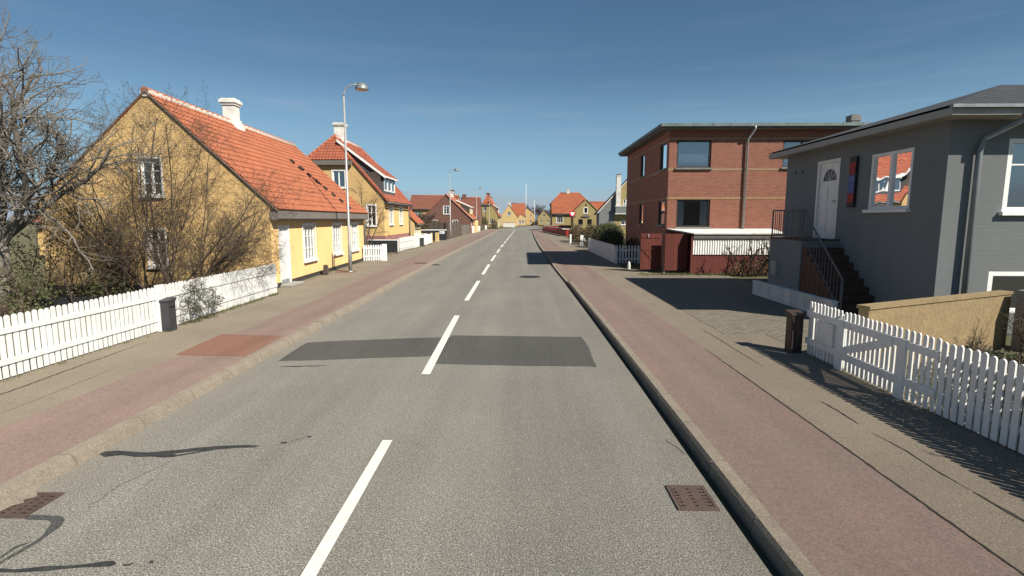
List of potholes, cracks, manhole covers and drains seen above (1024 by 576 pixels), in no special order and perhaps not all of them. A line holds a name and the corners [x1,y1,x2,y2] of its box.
drain grate [0,492,65,519]
crack [81,462,168,515]
drain grate [665,485,720,511]
